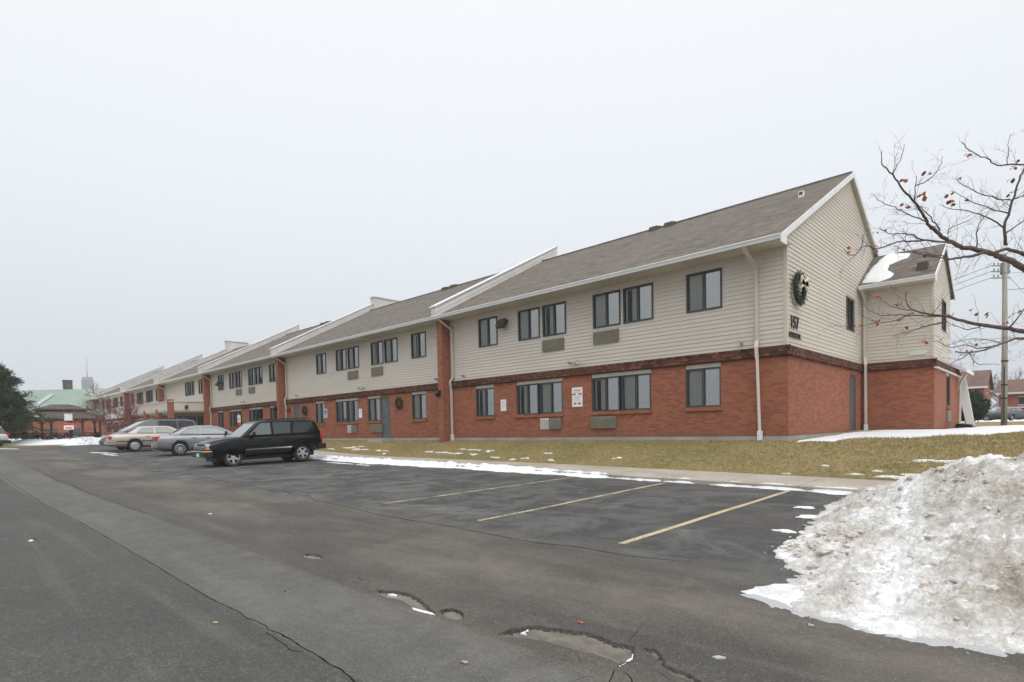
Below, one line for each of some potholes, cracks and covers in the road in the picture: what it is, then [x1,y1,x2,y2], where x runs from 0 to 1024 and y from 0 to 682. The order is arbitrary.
pothole [438,608,464,620]
pothole [497,625,635,669]
pothole [374,590,437,615]
